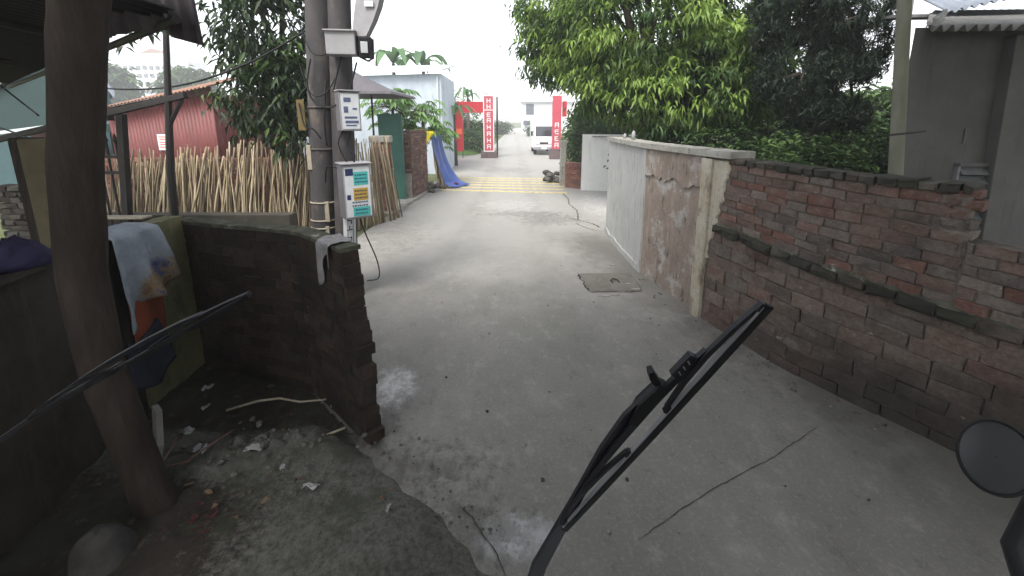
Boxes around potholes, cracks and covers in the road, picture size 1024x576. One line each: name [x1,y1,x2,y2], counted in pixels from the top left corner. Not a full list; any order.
crack [638,428,815,540]
crack [457,503,505,574]
manhole cover [577,273,643,293]
